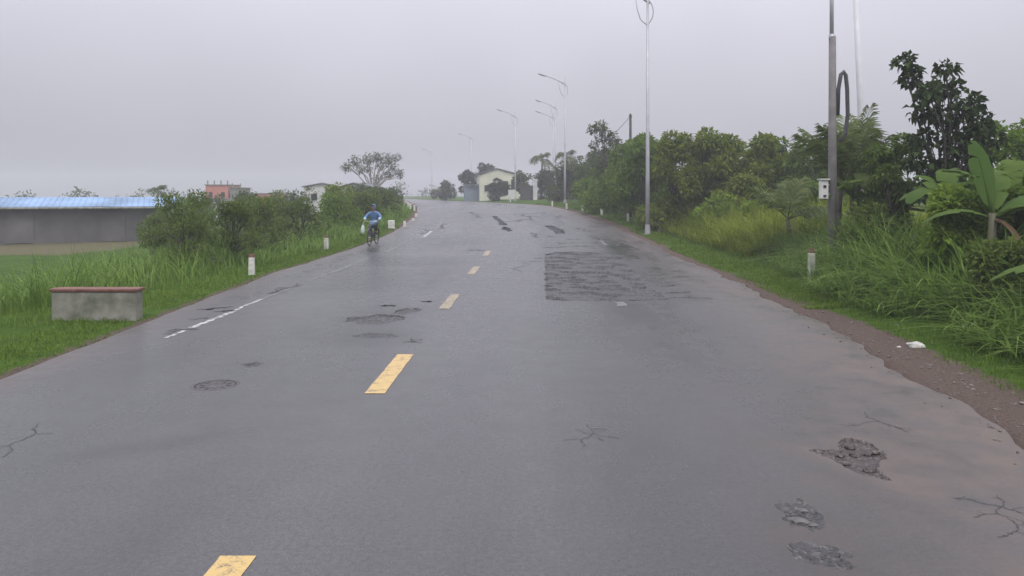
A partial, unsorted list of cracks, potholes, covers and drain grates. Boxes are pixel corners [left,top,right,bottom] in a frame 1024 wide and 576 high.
pothole [343,314,406,325]
manhole cover [190,379,240,391]
pothole [786,540,858,571]
crack [952,495,1024,537]
pothole [775,497,825,532]
pothole [809,437,892,481]
